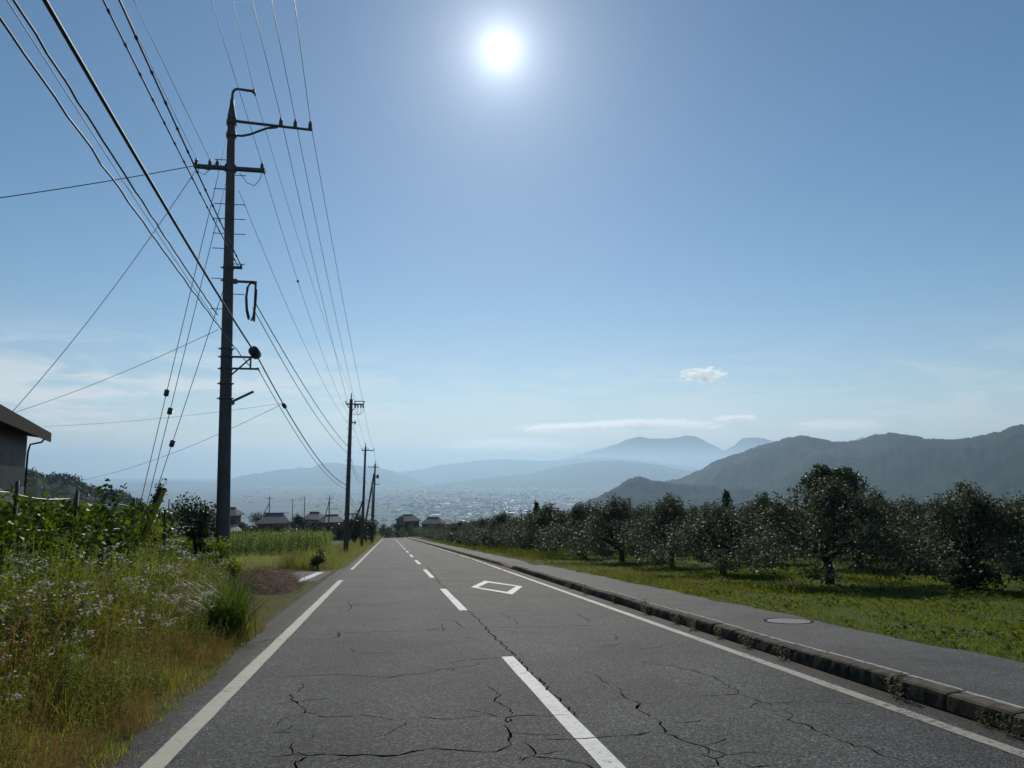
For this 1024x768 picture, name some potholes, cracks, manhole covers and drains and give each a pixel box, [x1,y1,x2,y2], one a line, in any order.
crack [275,657,772,768]
crack [290,618,468,654]
crack [641,661,904,762]
